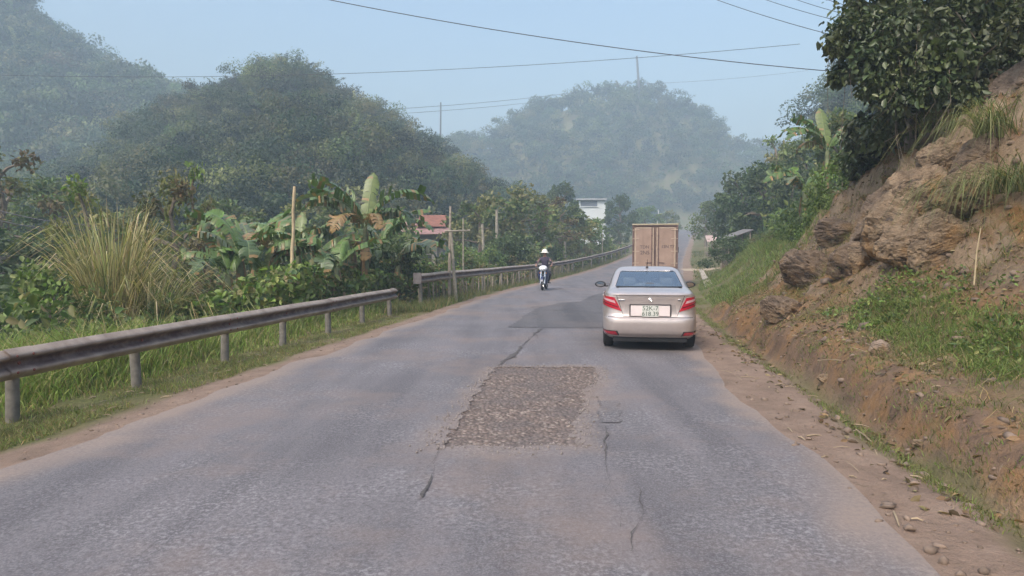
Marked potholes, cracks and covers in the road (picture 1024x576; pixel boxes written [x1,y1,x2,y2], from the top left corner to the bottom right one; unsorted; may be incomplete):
crack [495,328,542,367]
crack [420,450,439,497]
crack [603,426,644,548]
